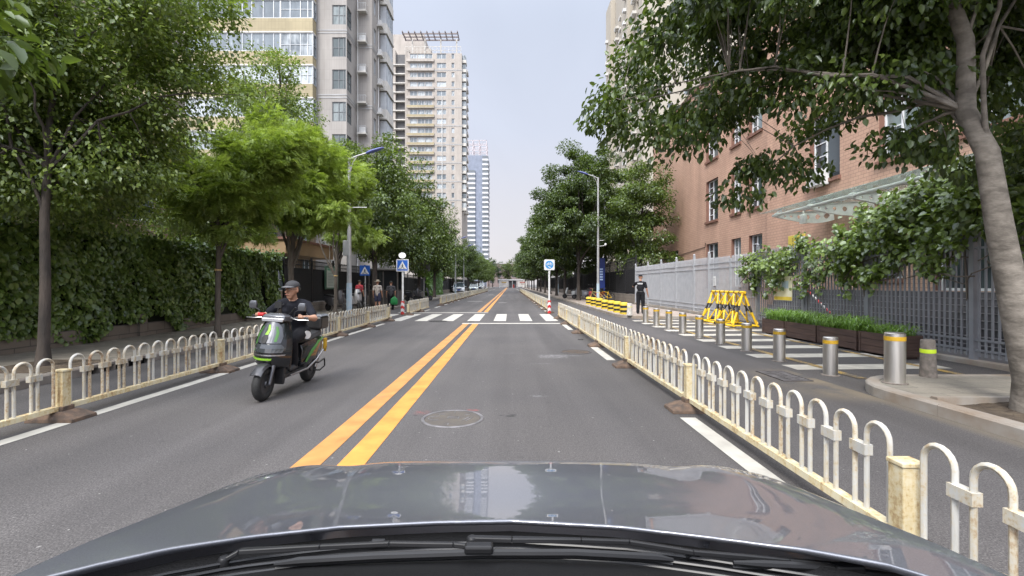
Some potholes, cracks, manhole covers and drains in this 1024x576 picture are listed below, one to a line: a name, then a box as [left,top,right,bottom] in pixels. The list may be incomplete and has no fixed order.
drain grate [756,371,814,381]
manhole cover [421,410,484,428]
